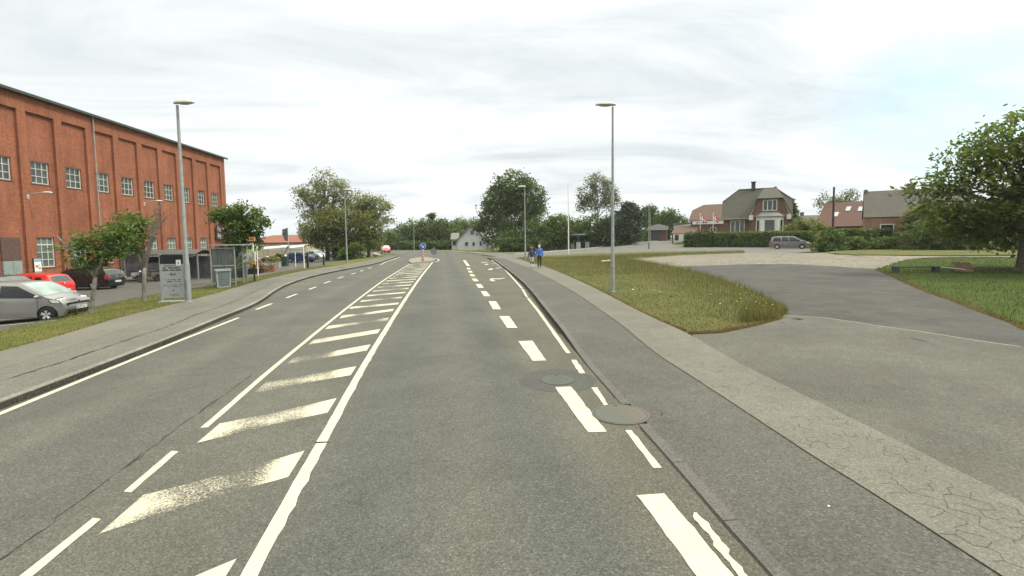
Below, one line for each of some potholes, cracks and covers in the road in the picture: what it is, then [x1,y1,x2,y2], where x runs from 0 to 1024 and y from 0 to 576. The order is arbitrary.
manhole cover [592,404,650,425]
manhole cover [540,374,576,385]
